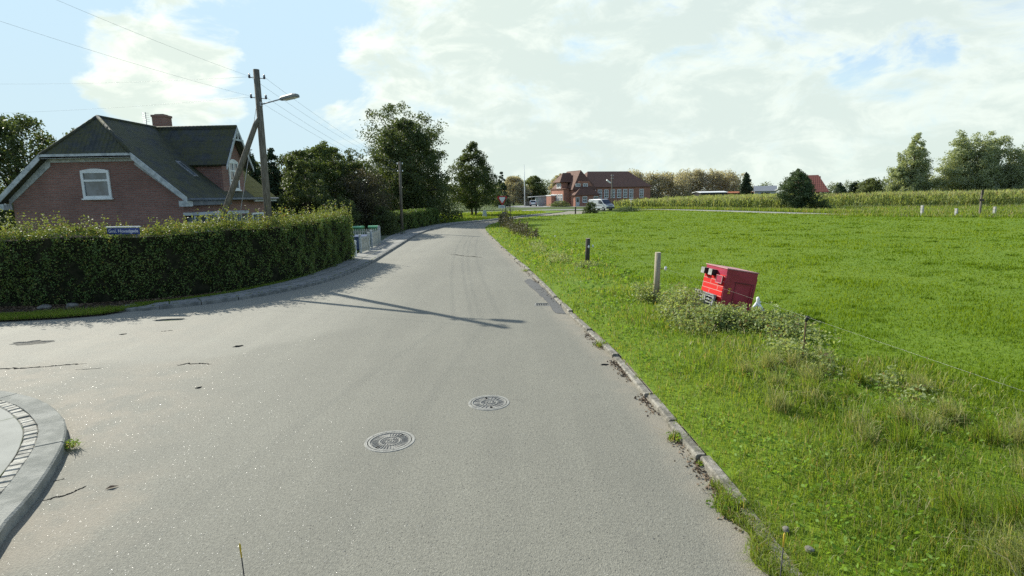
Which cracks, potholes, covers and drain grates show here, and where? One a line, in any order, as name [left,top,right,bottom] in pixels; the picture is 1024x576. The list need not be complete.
manhole cover [364,430,415,452]
manhole cover [468,395,510,411]
crack [41,478,85,502]
